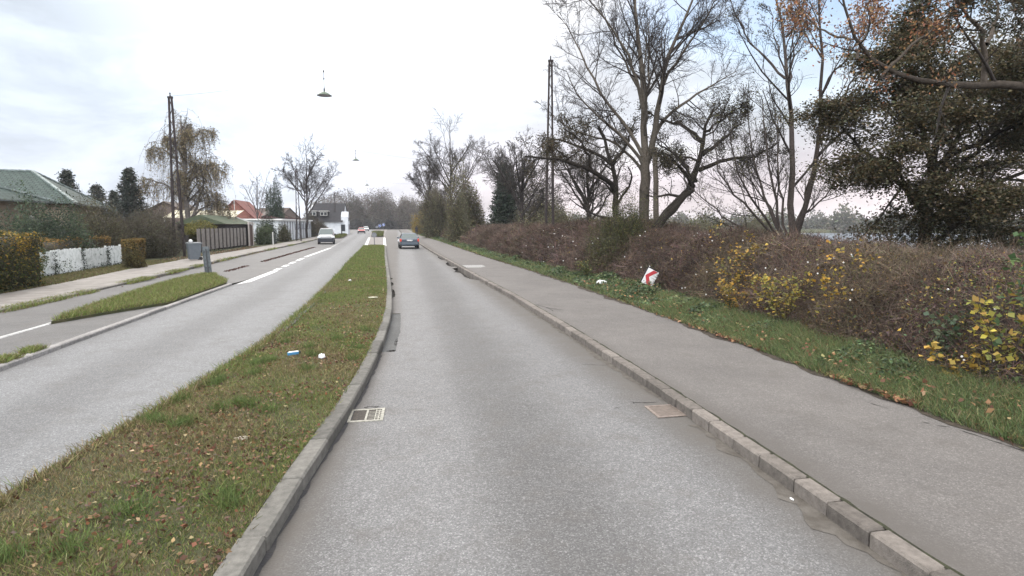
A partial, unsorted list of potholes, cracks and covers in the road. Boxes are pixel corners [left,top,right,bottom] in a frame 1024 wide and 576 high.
drain grate [347,408,385,423]
manhole cover [644,404,687,418]
